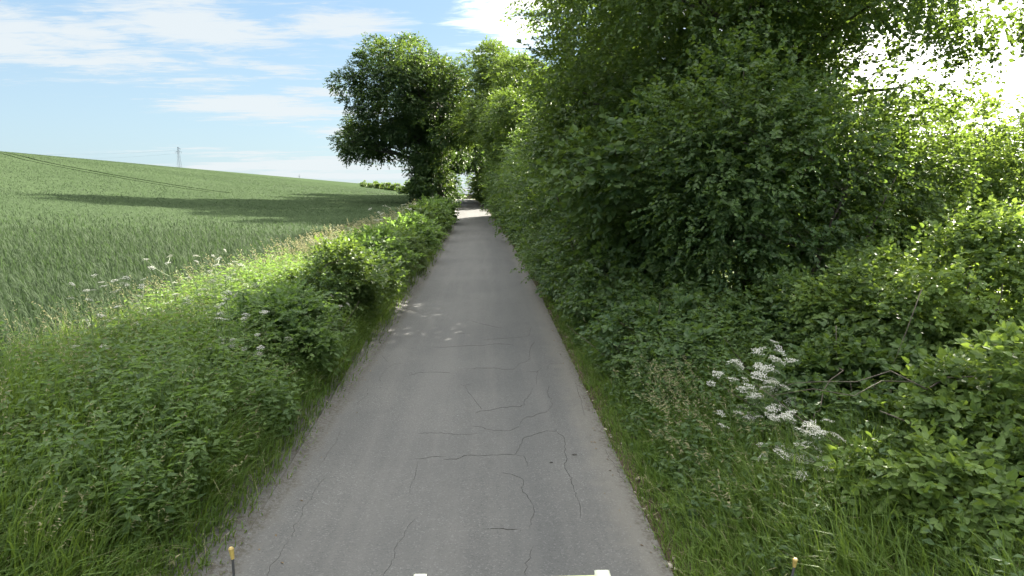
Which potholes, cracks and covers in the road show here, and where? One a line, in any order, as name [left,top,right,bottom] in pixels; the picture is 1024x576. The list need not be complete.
crack [410,321,581,519]
crack [491,473,535,530]
